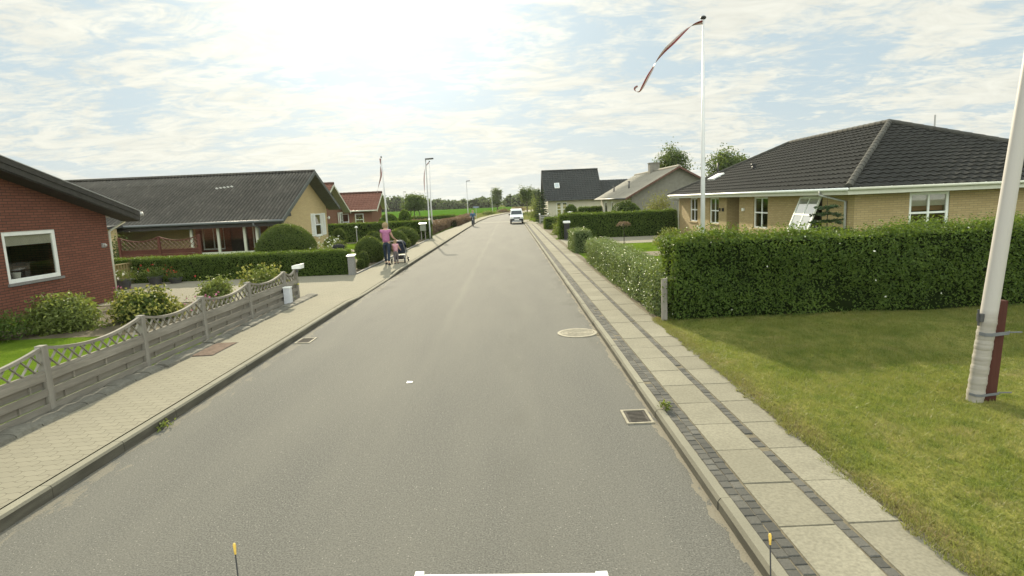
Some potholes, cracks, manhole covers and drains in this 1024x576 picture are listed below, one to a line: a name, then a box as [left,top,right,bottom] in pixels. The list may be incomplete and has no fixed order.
manhole cover [558,328,600,338]
drain grate [620,409,655,425]
